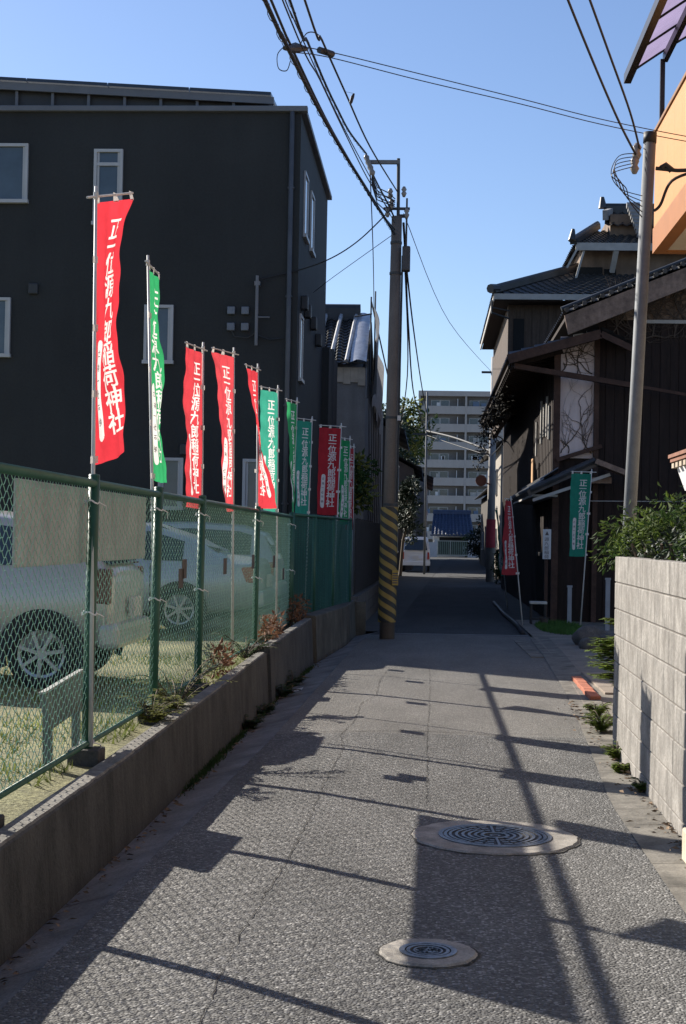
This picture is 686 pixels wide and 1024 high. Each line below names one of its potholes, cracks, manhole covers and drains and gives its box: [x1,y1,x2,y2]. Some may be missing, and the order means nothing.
manhole cover [374,938,481,969]
manhole cover [410,820,581,856]
